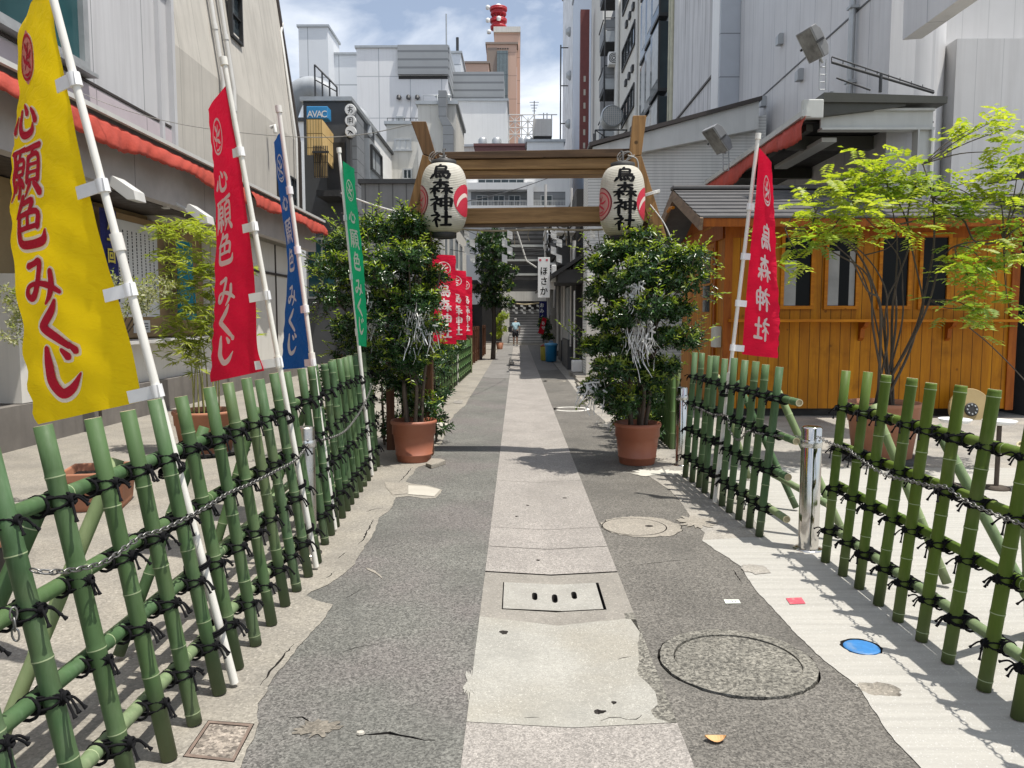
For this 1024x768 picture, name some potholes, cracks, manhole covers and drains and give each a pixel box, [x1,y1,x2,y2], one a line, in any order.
crack [360,732,430,741]
utility cover [183,720,254,762]
manhole cover [600,516,683,538]
manhole cover [657,629,821,701]
crack [260,644,294,685]
